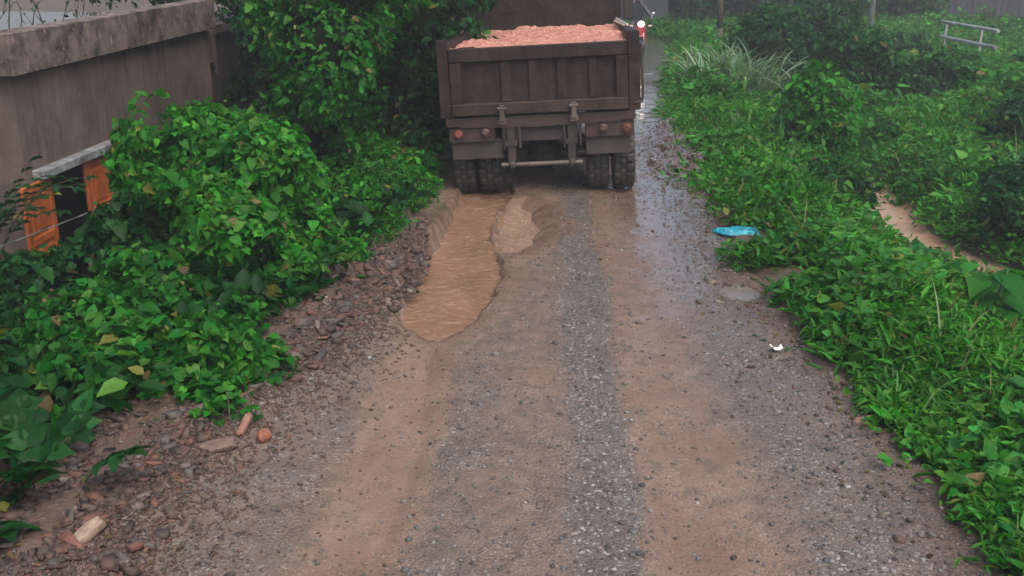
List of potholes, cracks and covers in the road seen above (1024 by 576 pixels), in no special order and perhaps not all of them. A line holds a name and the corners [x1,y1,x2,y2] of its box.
pothole [386,175,560,342]
